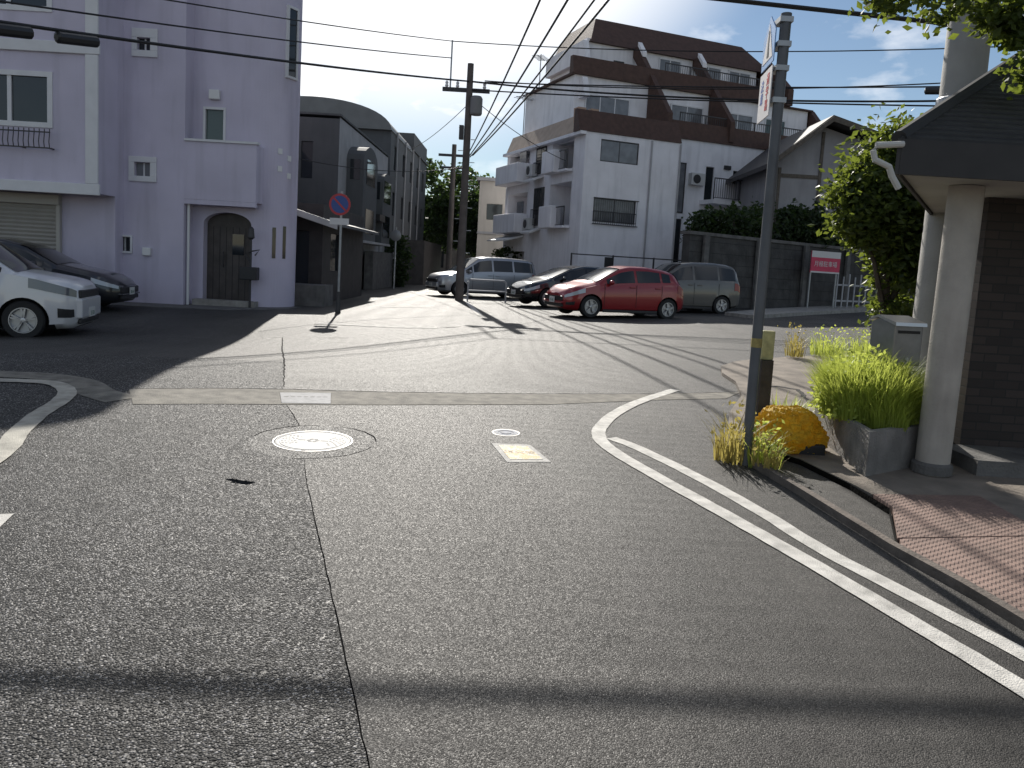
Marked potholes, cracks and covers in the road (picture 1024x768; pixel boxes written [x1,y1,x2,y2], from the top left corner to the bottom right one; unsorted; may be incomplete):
manhole cover [272,431,353,452]
manhole cover [491,443,551,462]
